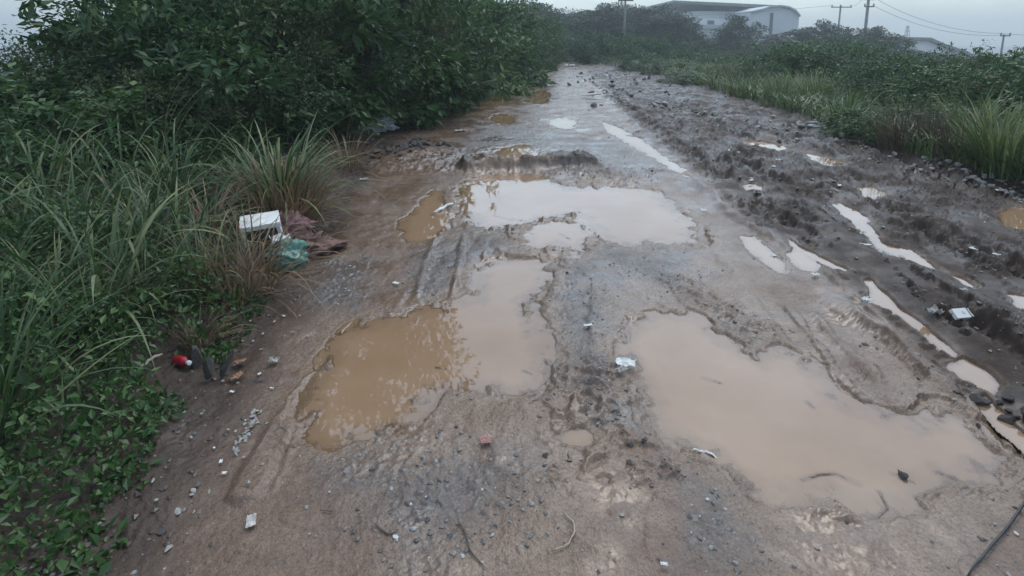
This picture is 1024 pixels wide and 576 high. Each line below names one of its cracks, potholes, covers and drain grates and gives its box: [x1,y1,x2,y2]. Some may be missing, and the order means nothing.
pothole [448,165,714,250]
pothole [282,252,570,455]
pothole [392,188,461,243]
pothole [516,217,599,261]
pothole [603,301,1024,535]
